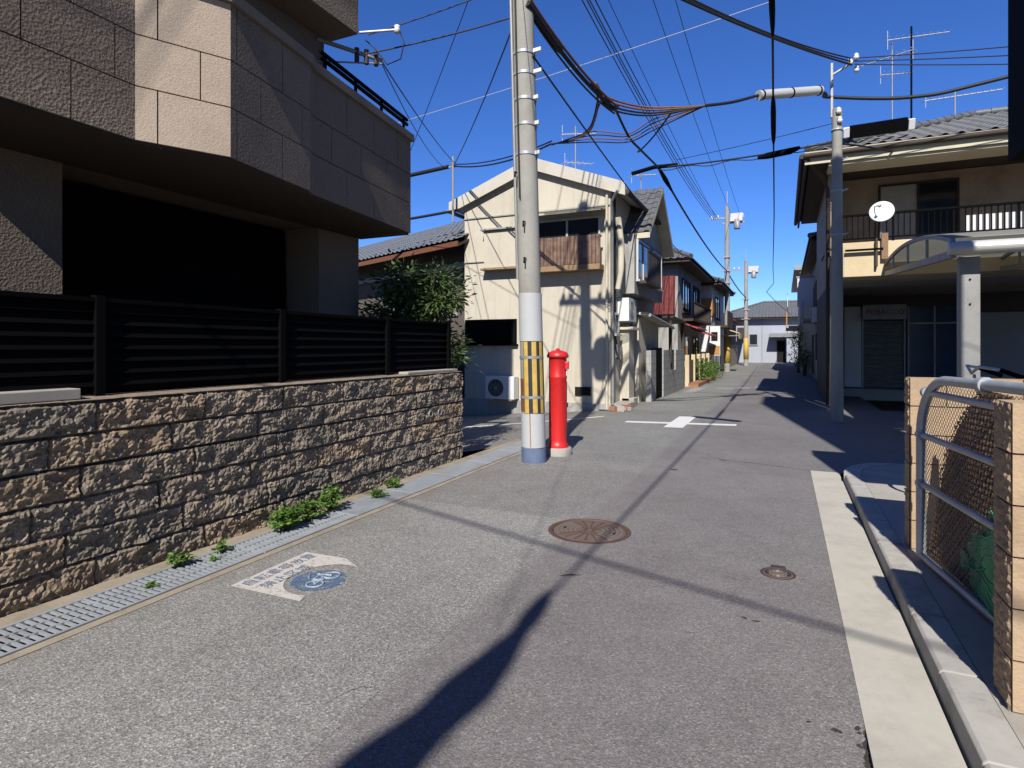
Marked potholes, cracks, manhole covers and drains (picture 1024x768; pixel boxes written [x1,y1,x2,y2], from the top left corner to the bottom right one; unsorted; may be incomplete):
drain grate [0,599,119,658]
manhole cover [760,564,796,580]
drain grate [82,545,264,611]
manhole cover [548,518,631,544]
drain grate [230,511,357,553]
